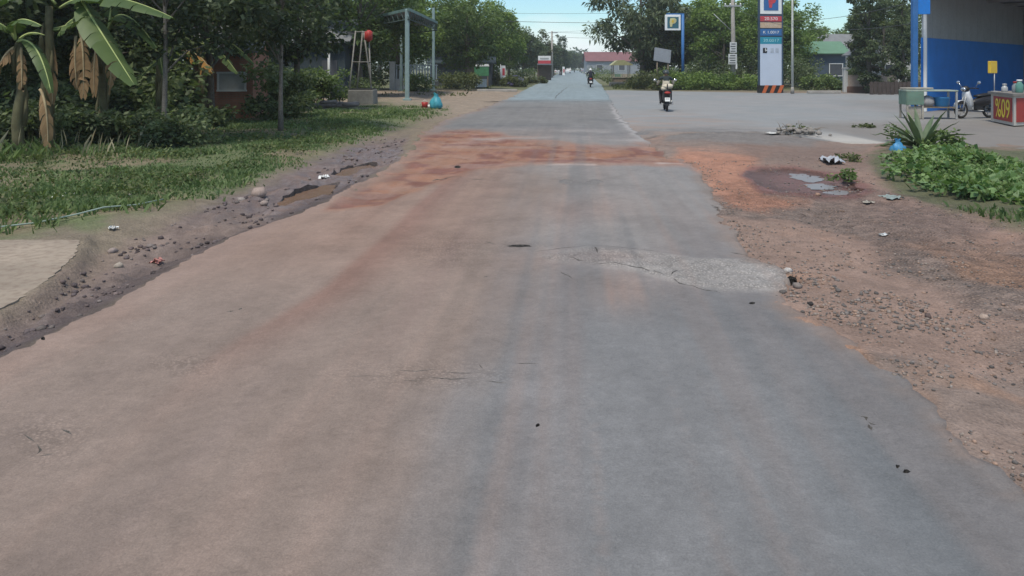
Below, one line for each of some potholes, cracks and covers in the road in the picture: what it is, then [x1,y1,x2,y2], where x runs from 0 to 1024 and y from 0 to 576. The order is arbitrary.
pothole [330,162,378,176]
crack [542,245,720,293]
pothole [273,182,340,206]
crack [346,363,537,383]
crack [24,429,71,456]
